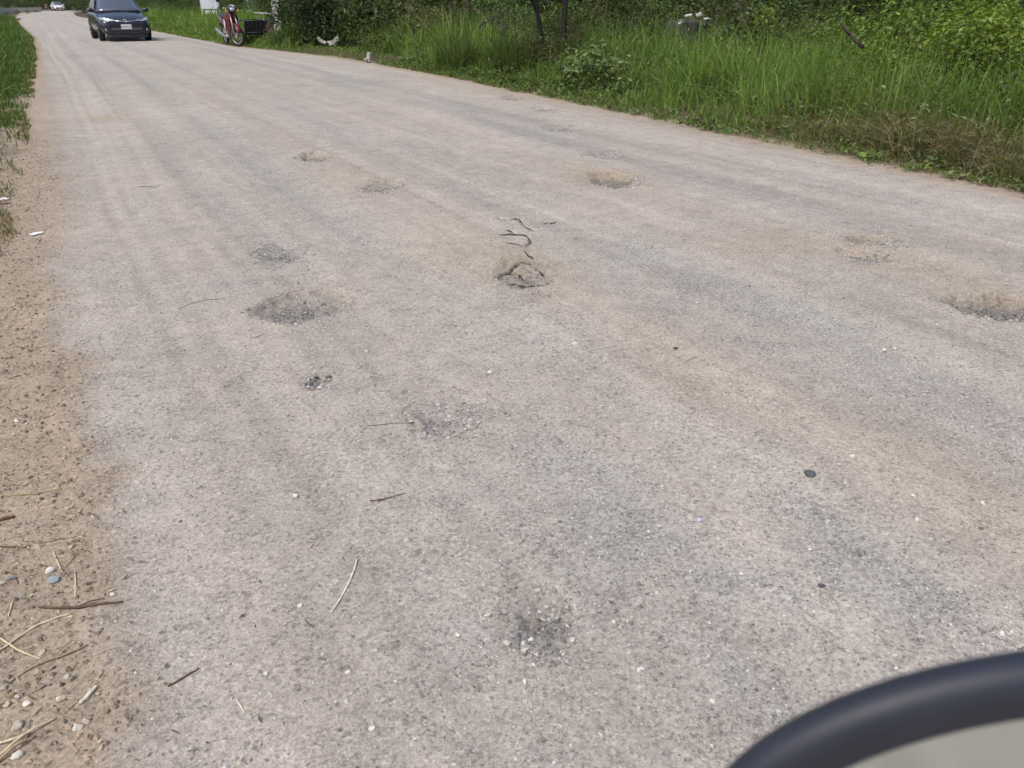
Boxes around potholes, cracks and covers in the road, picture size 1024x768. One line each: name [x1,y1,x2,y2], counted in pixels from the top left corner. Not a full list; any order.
pothole [834,247,887,264]
pothole [847,236,896,247]
pothole [248,288,353,324]
crack [497,218,556,289]
pothole [944,292,1024,321]
pothole [403,389,505,441]
pothole [358,178,406,193]
pothole [499,582,572,657]
pothole [494,254,553,289]
pothole [588,171,638,189]
pothole [299,151,332,162]
